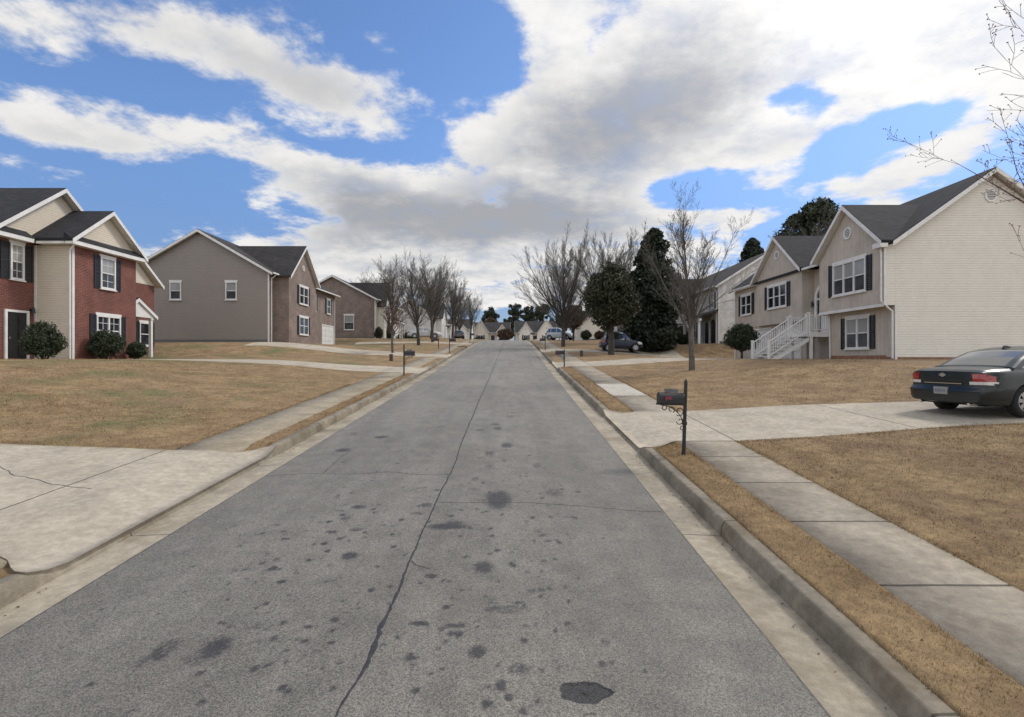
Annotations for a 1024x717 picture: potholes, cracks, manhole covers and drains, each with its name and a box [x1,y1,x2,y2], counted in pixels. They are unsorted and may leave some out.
crack [0,466,91,489]
